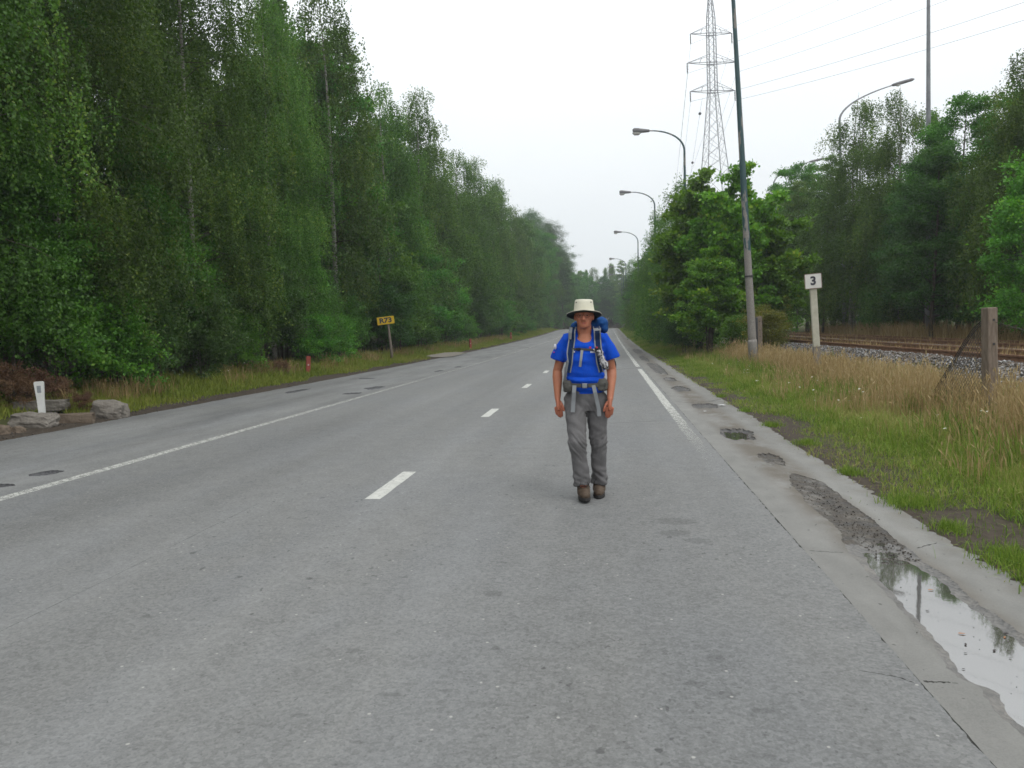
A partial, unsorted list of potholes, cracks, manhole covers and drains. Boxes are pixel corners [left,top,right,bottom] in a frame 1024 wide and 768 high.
pothole [789,474,1024,736]
pothole [720,428,757,440]
pothole [757,453,786,466]
